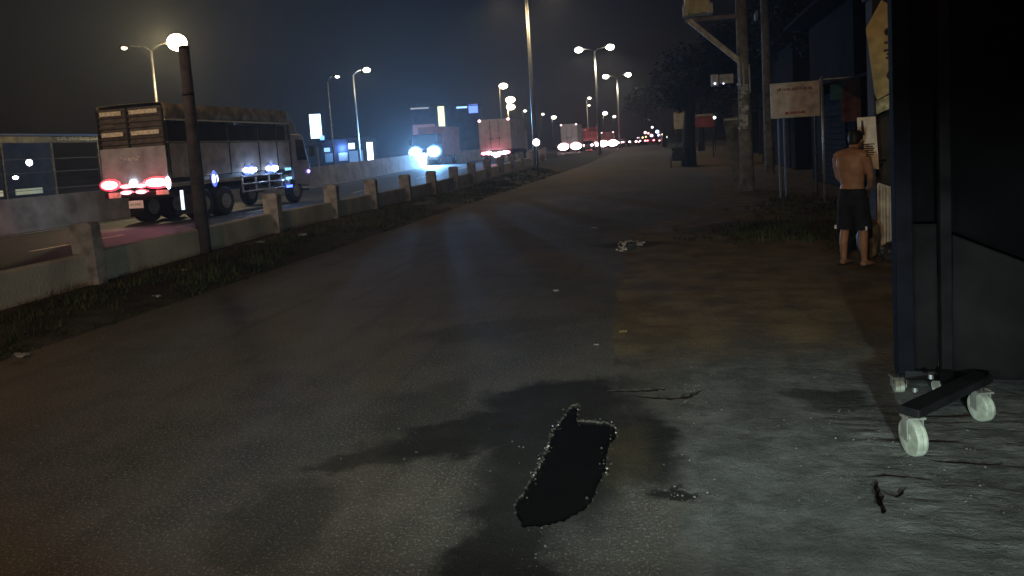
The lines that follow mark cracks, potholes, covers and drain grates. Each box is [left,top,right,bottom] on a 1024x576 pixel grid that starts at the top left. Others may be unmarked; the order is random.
crack [866,459,1003,514]
crack [607,387,702,400]
pothole [513,403,619,528]
